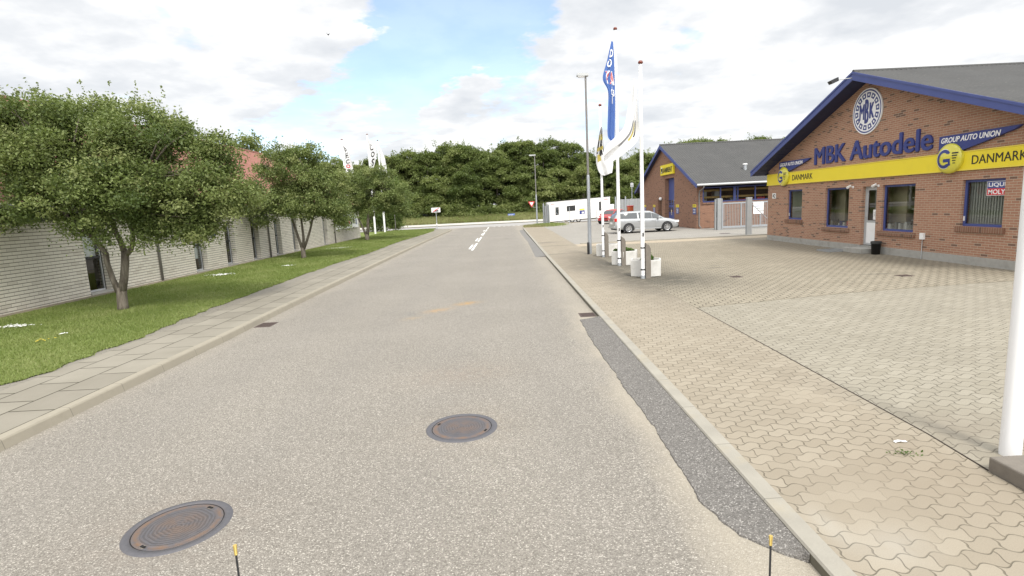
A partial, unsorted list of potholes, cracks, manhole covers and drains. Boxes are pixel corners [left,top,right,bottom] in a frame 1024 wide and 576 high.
manhole cover [119,500,233,557]
manhole cover [426,414,497,443]
